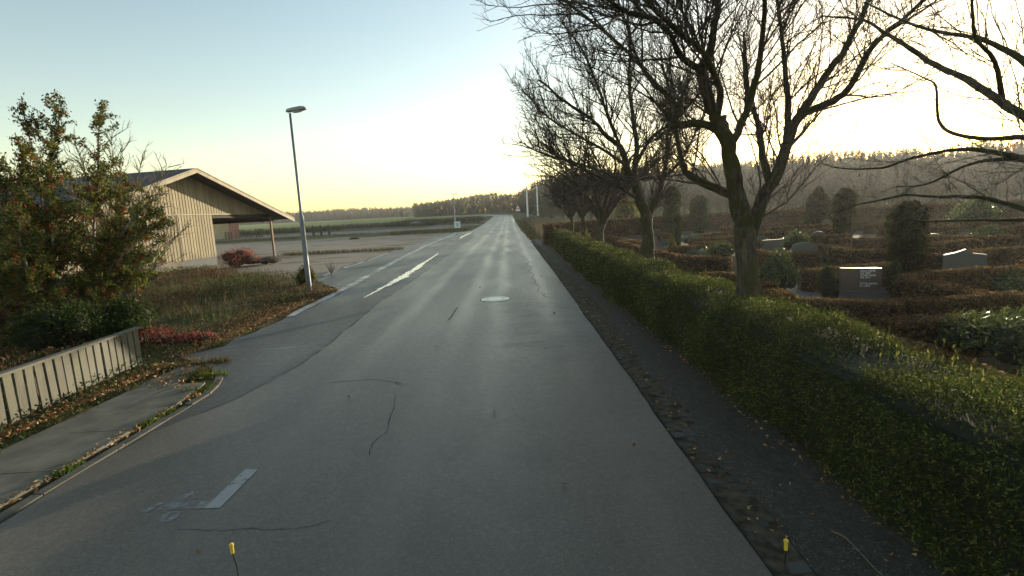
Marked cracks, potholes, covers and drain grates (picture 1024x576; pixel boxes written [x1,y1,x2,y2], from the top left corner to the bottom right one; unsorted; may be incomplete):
crack [178,520,331,531]
